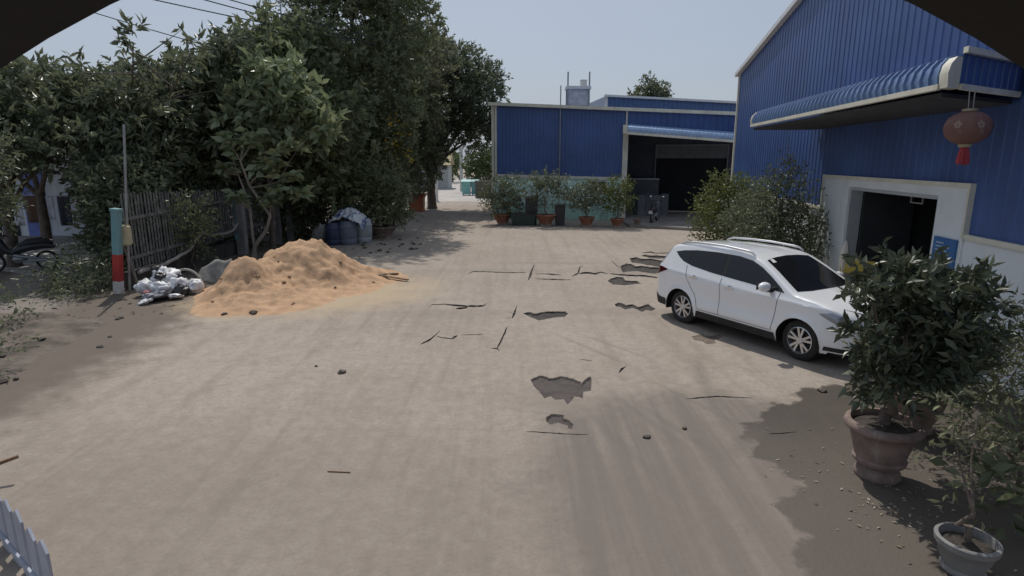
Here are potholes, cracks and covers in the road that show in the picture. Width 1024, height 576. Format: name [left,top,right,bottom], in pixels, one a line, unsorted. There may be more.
pothole [523,311,568,320]
pothole [621,263,659,274]
pothole [629,257,662,267]
pothole [615,303,656,312]
pothole [608,277,640,285]
pothole [546,414,574,429]
crack [420,306,517,351]
crack [470,261,658,280]
pothole [530,375,592,404]
